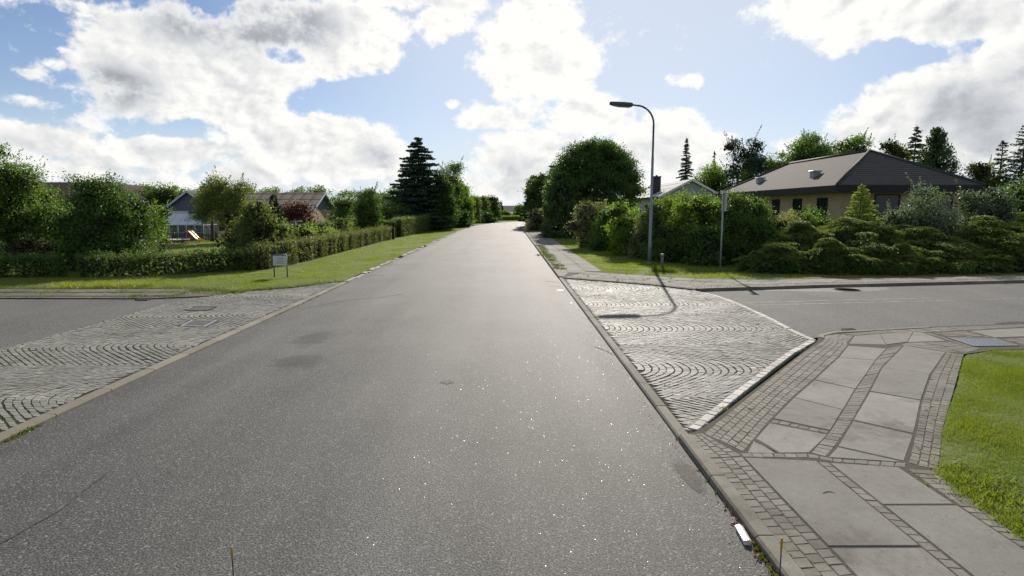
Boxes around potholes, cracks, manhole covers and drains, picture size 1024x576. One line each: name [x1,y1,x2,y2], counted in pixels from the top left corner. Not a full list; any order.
crack [0,471,110,544]
